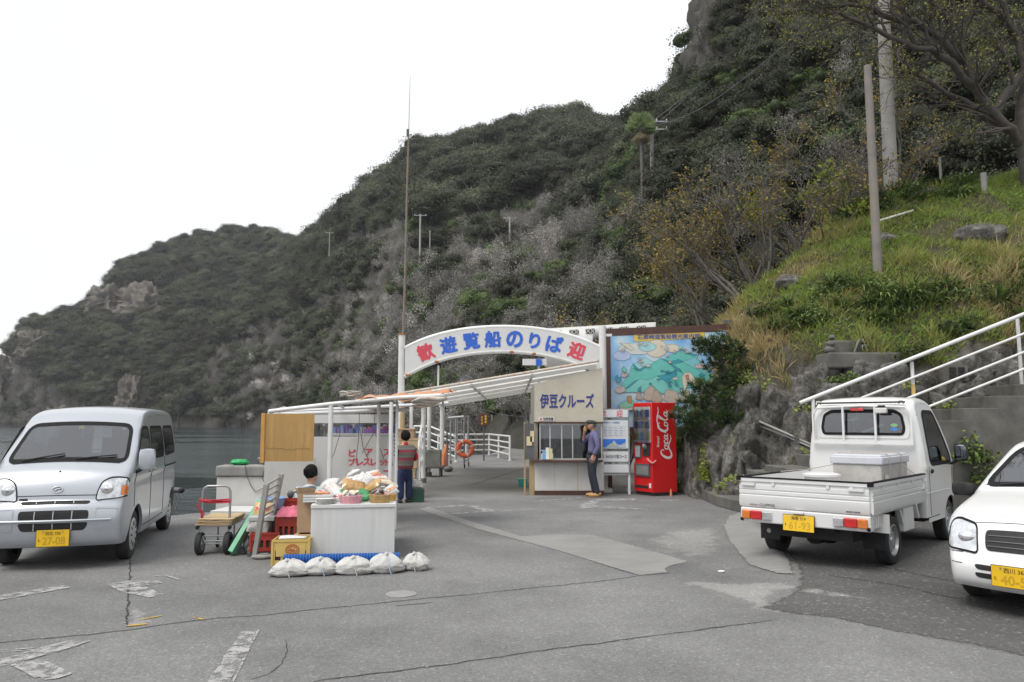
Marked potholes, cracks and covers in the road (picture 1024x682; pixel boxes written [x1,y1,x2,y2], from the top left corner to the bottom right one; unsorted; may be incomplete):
crack [312,620,772,682]
